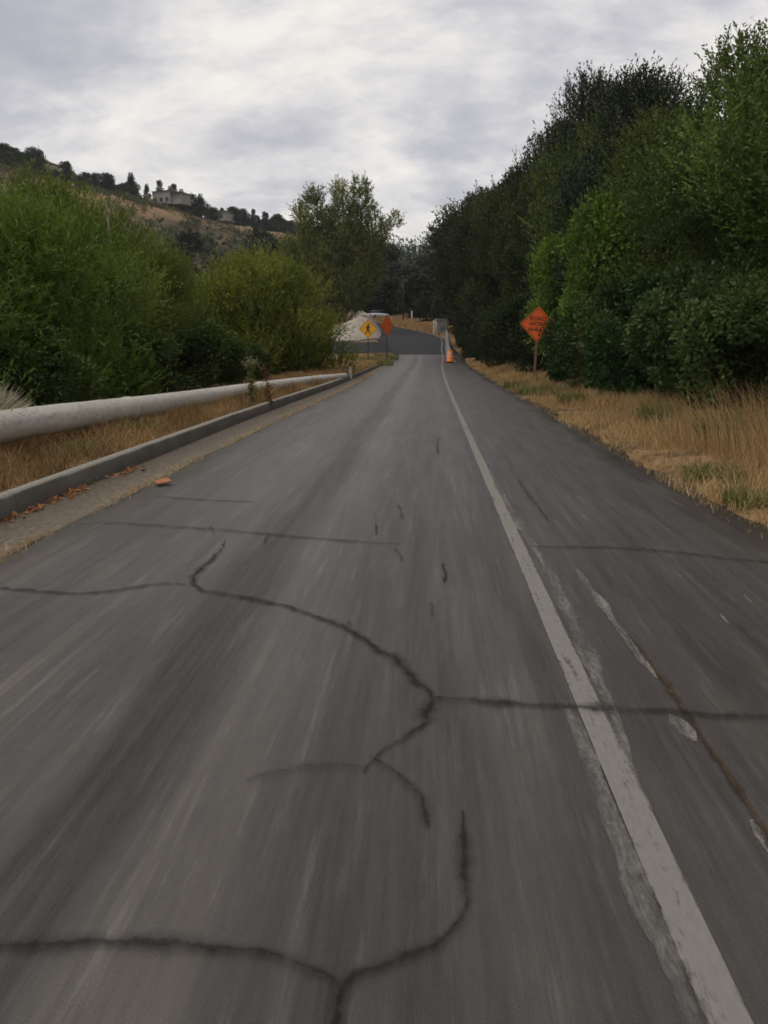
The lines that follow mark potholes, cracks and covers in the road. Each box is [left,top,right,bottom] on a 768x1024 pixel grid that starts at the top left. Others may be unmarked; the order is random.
crack [0,810,468,1024]
crack [2,540,768,826]
